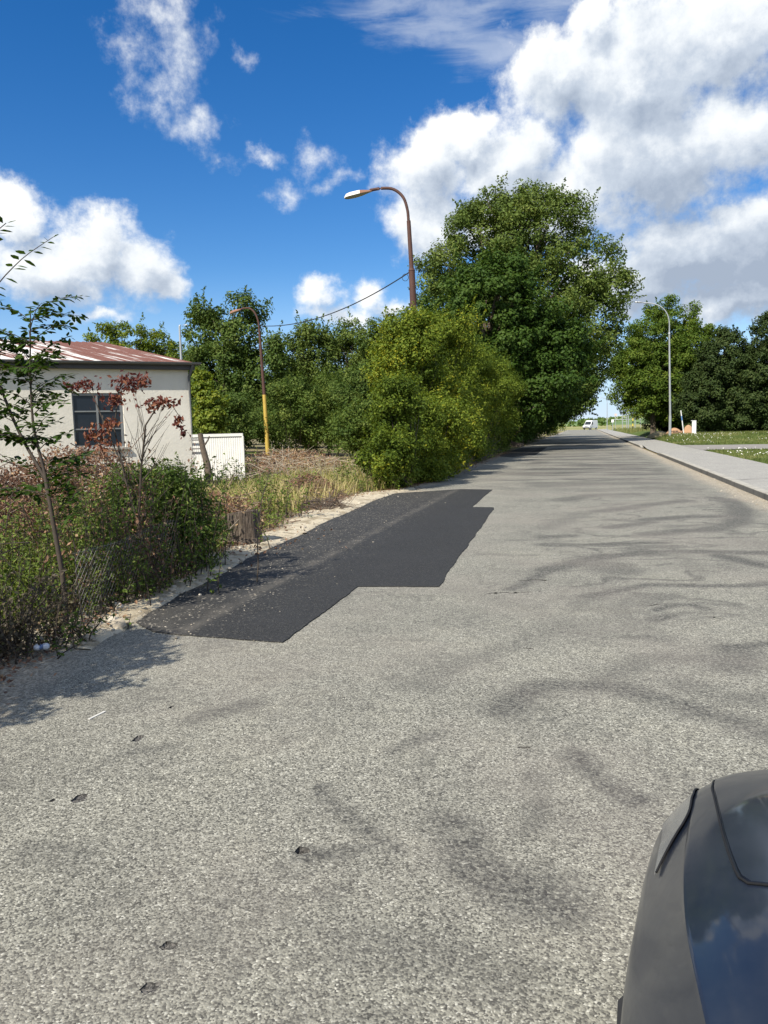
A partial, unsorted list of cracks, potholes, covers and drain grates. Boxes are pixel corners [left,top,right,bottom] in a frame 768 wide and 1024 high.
pothole [139,982,160,995]
pothole [159,941,178,950]
